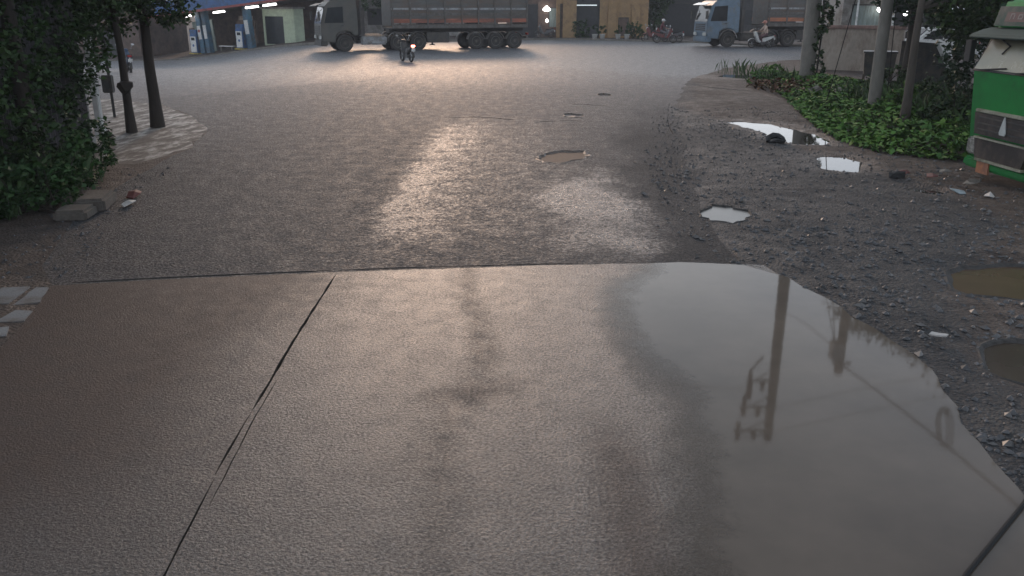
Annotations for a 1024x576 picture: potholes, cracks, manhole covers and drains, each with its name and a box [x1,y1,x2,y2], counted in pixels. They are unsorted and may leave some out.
pothole [943,262,1024,301]
pothole [699,204,753,224]
pothole [975,338,1024,386]
pothole [536,150,592,164]
